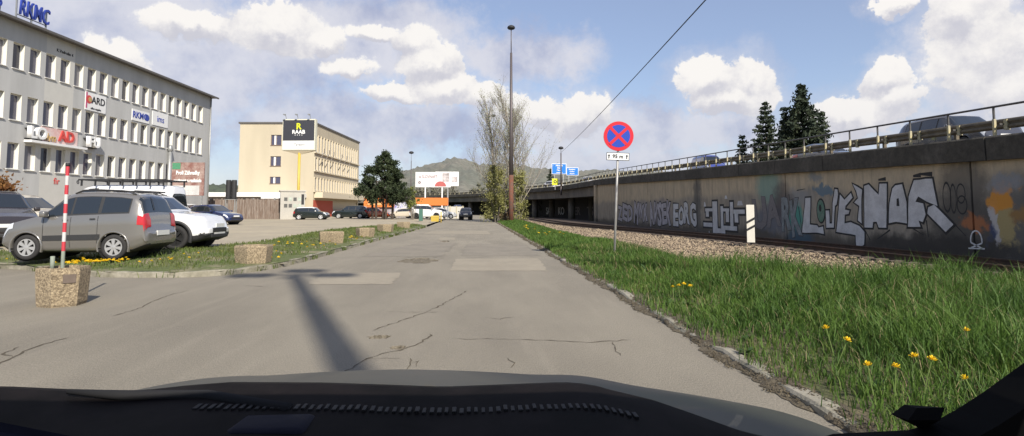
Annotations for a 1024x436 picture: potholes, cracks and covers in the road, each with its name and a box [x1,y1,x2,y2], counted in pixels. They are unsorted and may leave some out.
crack [344,291,466,371]
crack [0,337,69,363]
